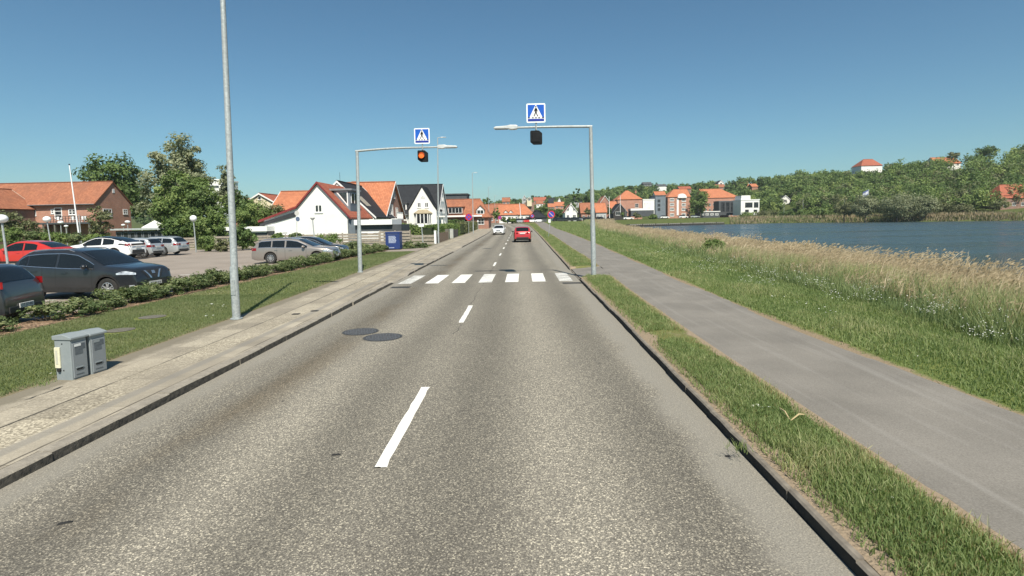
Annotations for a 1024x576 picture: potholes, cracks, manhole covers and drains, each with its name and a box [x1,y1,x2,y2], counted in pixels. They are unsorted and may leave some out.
manhole cover [363,333,403,341]
